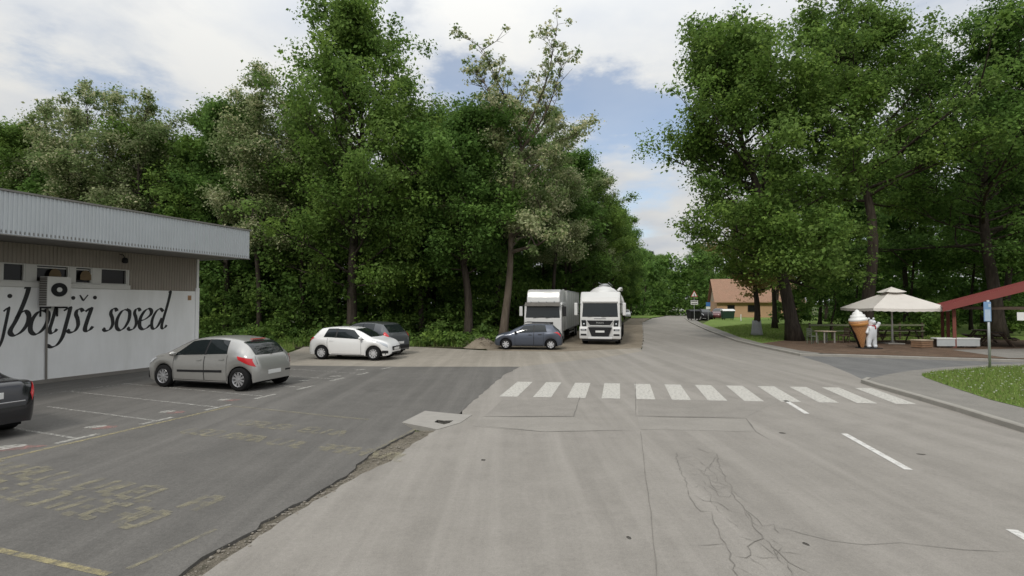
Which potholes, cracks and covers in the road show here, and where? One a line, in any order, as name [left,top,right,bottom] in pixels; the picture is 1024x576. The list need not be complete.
drain grate [402,411,472,431]
crack [676,448,1008,576]
